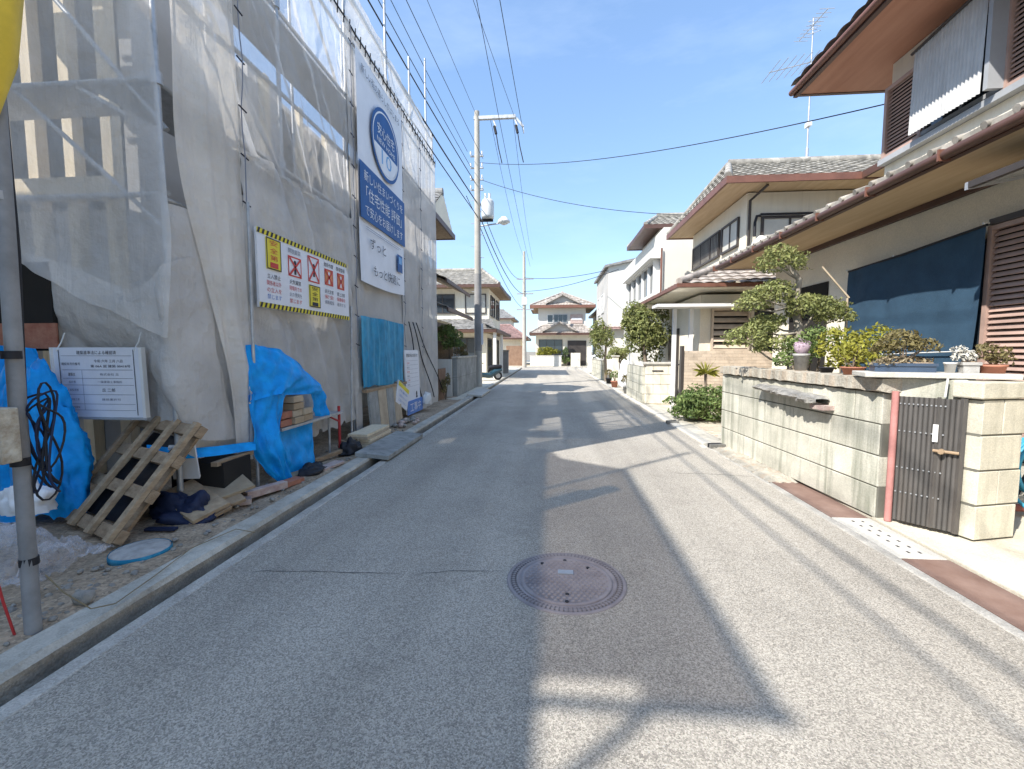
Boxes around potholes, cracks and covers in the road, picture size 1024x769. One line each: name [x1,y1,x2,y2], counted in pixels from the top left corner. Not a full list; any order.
manhole cover [507,553,627,616]
